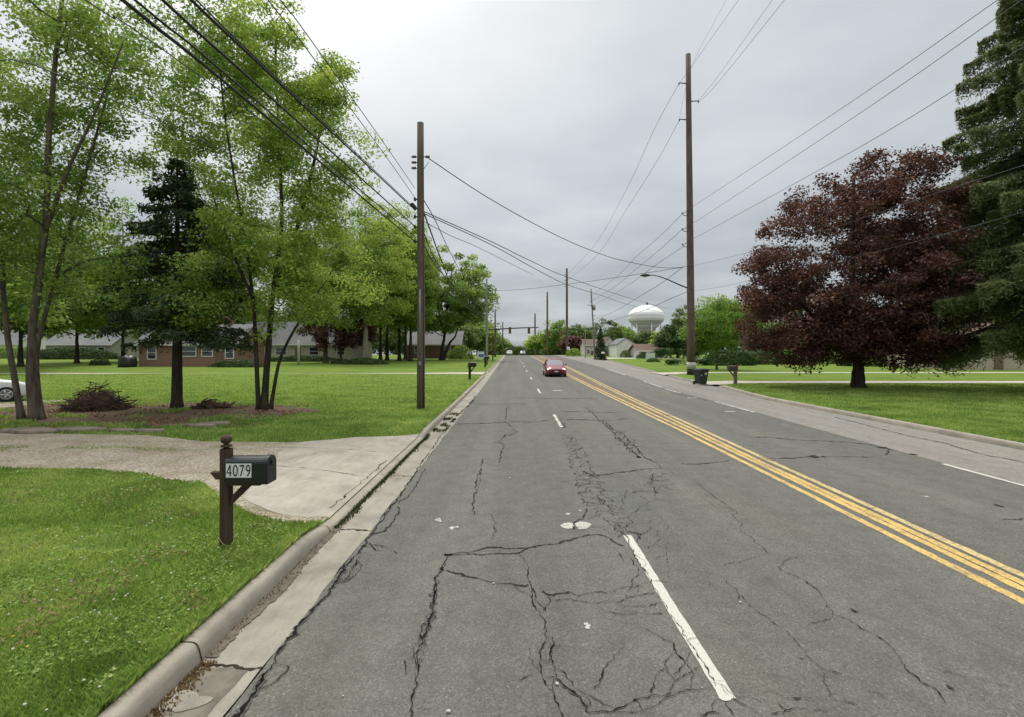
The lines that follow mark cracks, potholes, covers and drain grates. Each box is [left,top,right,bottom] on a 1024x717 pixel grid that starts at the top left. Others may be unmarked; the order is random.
crack [338,469,425,583]
crack [404,398,1009,717]
